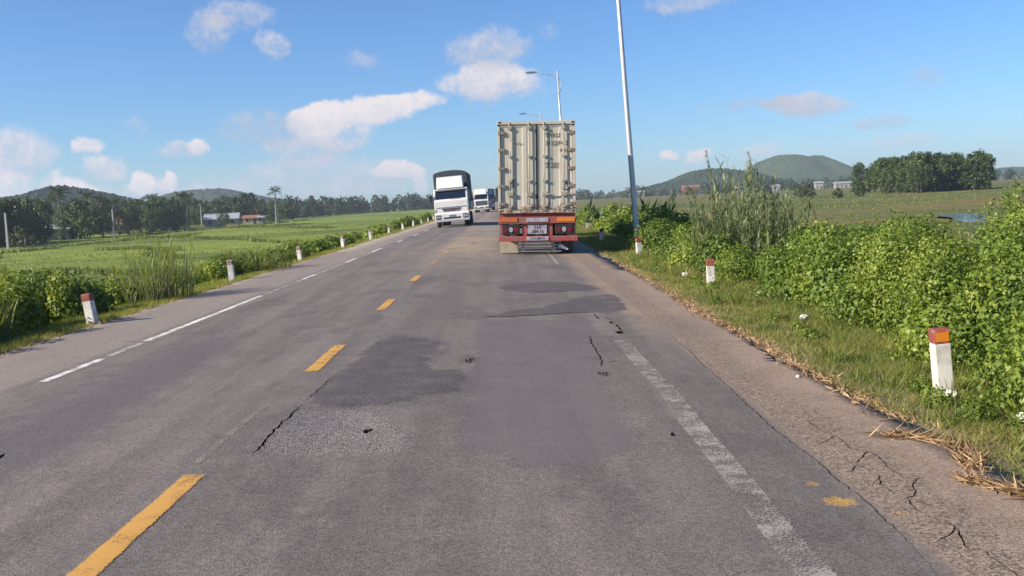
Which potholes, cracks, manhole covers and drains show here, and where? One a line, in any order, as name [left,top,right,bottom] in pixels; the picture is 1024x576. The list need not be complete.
crack [252,378,332,455]
crack [675,339,1018,576]
crack [491,312,622,368]
